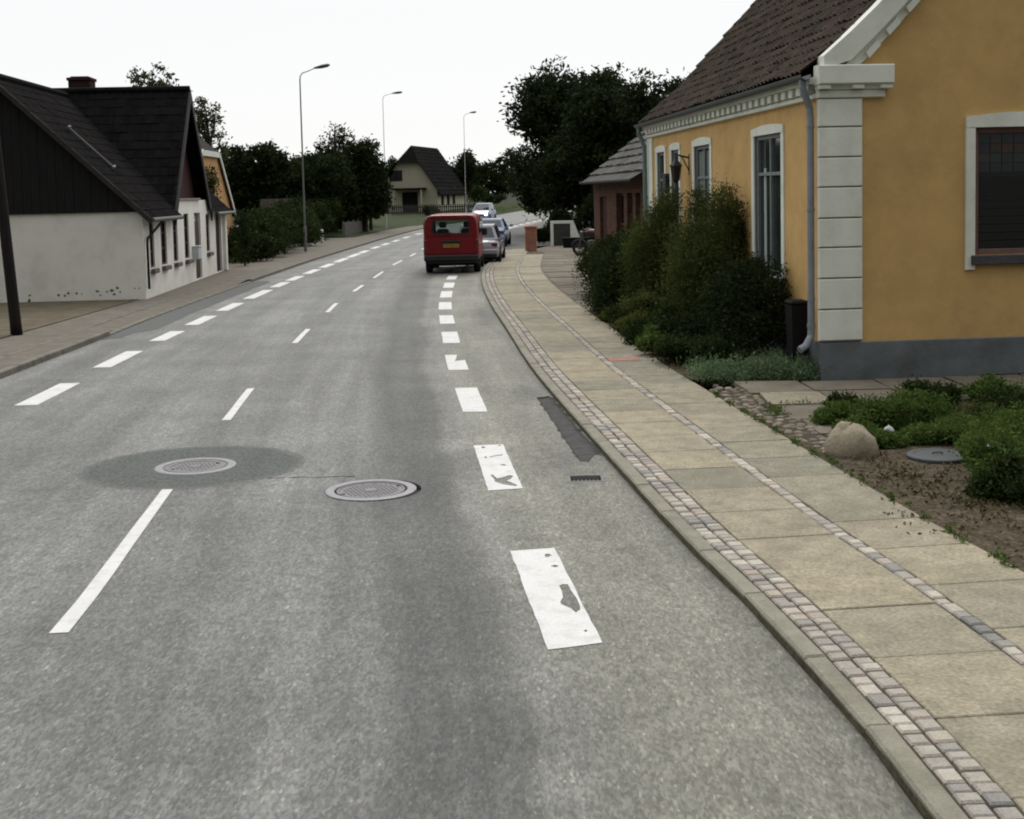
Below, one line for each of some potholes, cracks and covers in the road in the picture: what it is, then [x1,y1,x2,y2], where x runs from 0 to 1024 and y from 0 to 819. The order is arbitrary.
manhole cover [325,479,421,502]
manhole cover [154,457,236,475]
